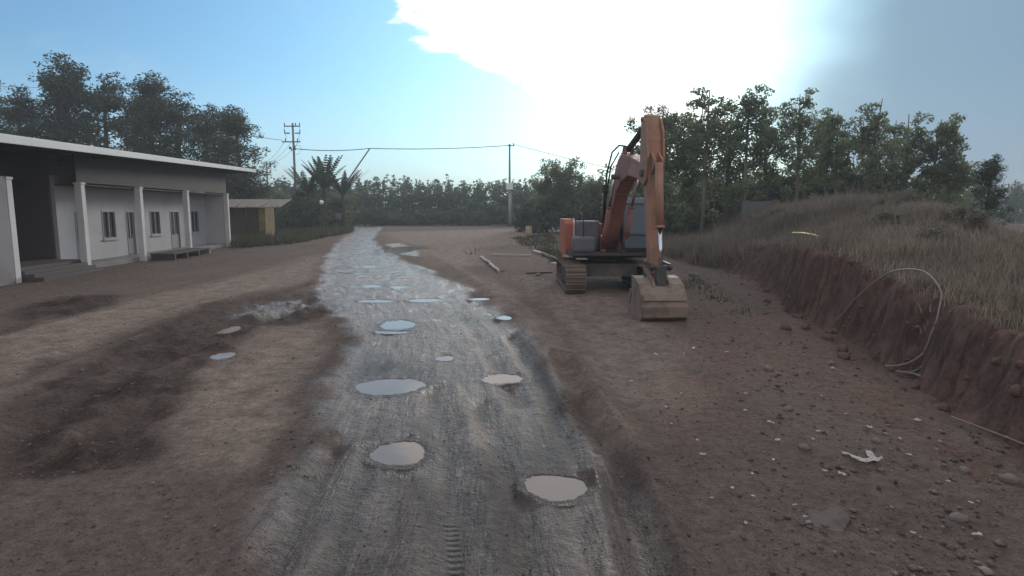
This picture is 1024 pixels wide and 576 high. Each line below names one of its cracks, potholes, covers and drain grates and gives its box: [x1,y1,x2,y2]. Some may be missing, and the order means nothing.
pothole [374,318,423,332]
pothole [474,372,532,388]
pothole [494,313,515,322]
pothole [204,351,241,362]
pothole [213,324,245,337]
pothole [511,469,600,508]
pothole [341,376,442,398]
pothole [357,435,437,471]
pothole [431,354,458,362]
